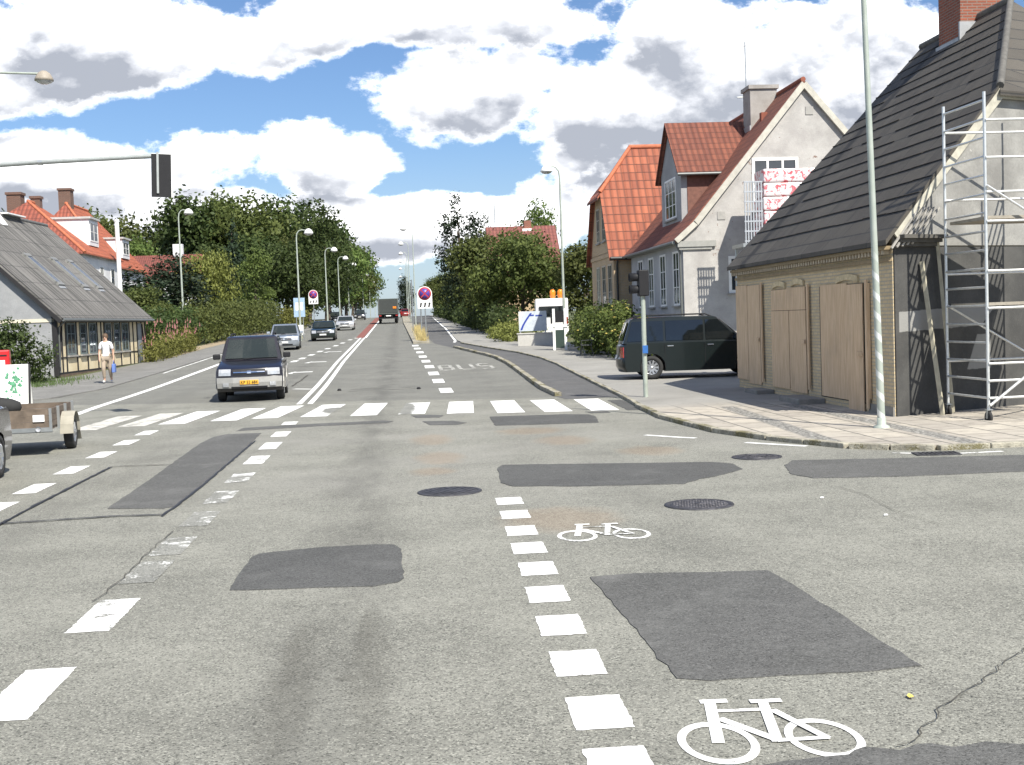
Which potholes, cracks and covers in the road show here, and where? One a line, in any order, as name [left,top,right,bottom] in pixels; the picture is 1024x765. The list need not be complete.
crack [0,441,255,601]
crack [898,648,1024,745]
manhole cover [664,499,734,510]
manhole cover [417,486,482,497]
